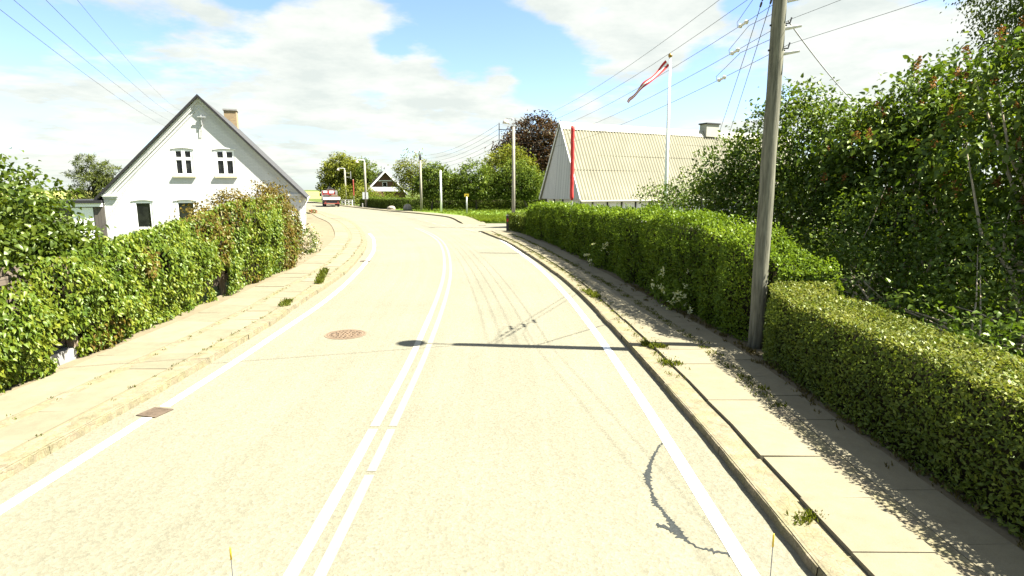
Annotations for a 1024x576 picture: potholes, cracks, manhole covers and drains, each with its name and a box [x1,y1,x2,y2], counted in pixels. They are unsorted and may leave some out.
manhole cover [324,329,367,339]
